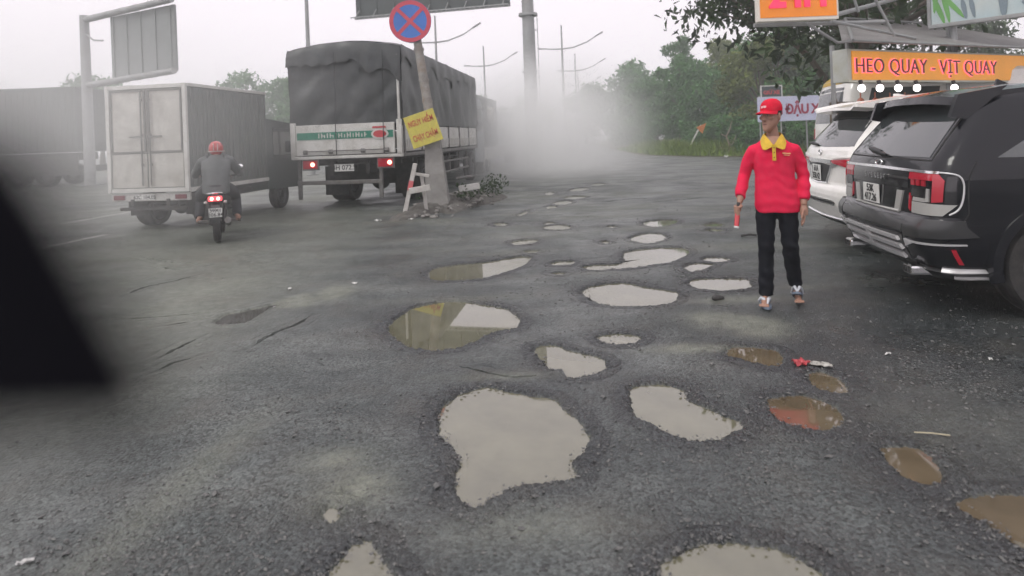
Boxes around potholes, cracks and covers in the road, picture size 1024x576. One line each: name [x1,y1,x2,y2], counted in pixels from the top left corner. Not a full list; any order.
pothole [628,524,861,576]
crack [116,256,324,375]
pothole [571,280,690,309]
pothole [201,301,289,328]
pothole [573,245,698,272]
pothole [418,379,611,521]
pothole [711,341,800,372]
pothole [583,329,656,349]
pothole [856,435,972,496]
pothole [789,365,870,401]
pothole [419,254,540,283]
pothole [375,298,533,355]
